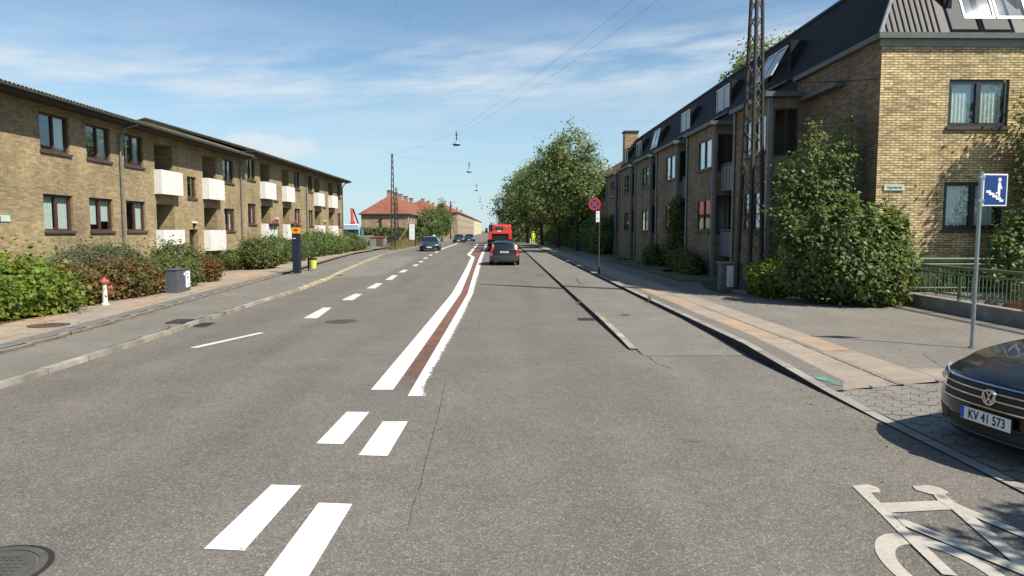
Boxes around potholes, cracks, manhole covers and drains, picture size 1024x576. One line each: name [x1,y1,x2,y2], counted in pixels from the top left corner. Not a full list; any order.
manhole cover [0,545,55,576]
drain grate [165,319,215,327]
